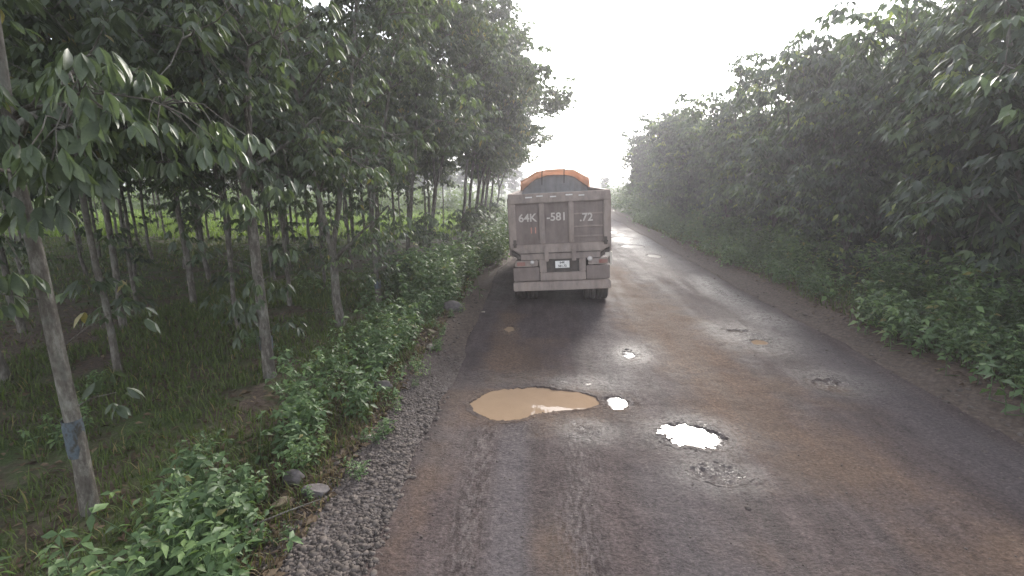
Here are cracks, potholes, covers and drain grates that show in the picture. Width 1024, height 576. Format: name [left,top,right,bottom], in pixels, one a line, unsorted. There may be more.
pothole [681,458,755,488]
pothole [462,383,608,424]
pothole [744,337,775,347]
pothole [649,418,737,453]
pothole [616,347,642,361]
pothole [599,393,635,412]
pothole [496,324,520,335]
pothole [804,376,853,393]
